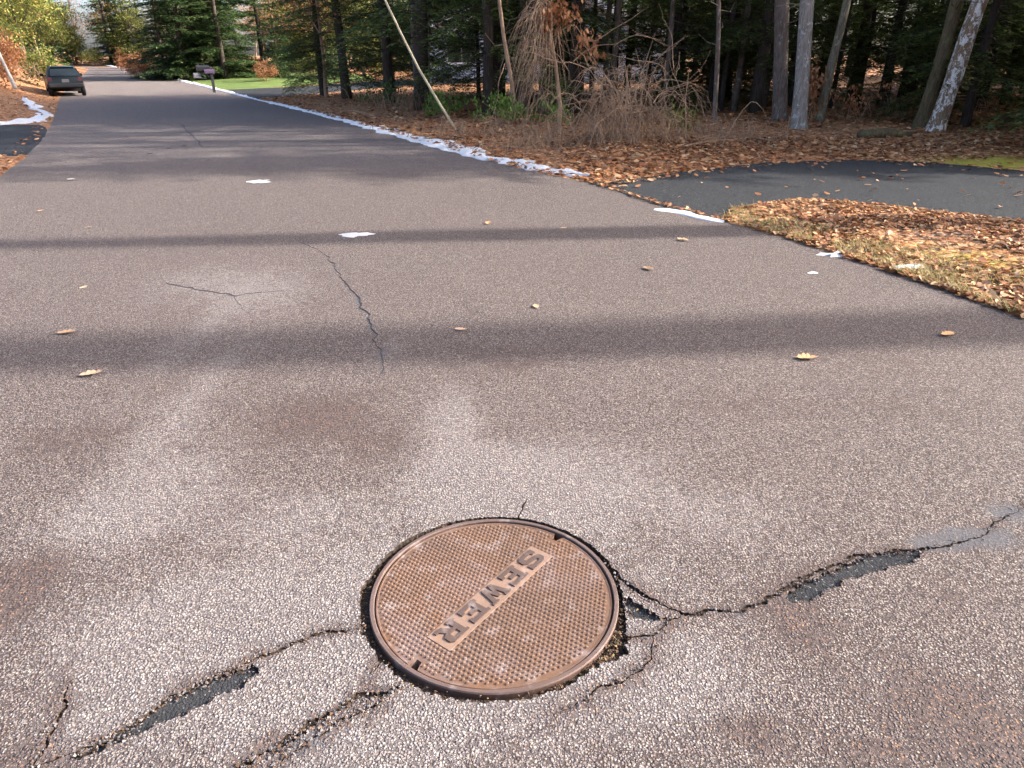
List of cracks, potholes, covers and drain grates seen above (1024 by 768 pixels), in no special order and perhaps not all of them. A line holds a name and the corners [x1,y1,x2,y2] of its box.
manhole cover [369,519,619,700]
crack [301,242,384,381]
crack [166,283,287,309]
crack [30,496,1024,768]
